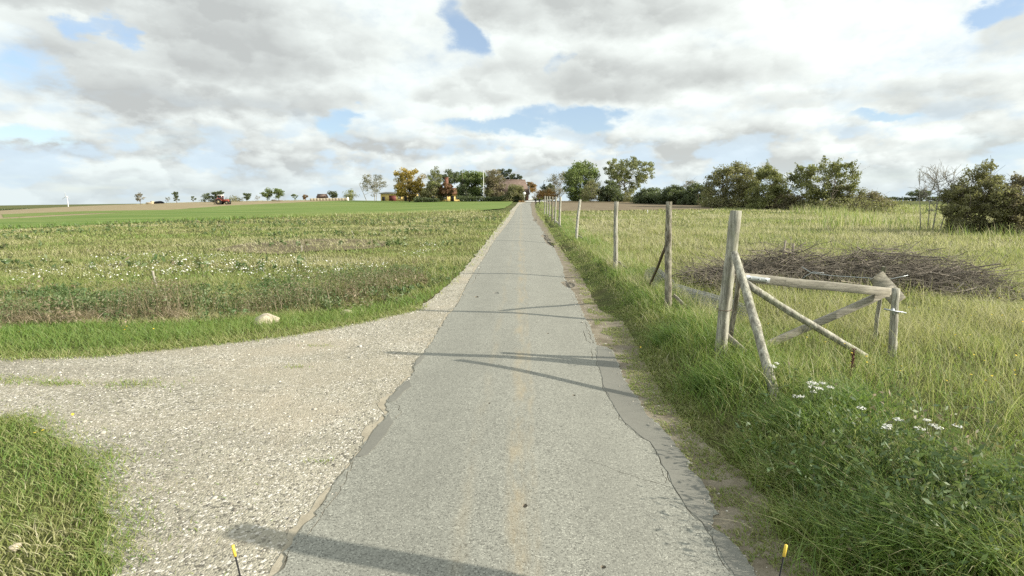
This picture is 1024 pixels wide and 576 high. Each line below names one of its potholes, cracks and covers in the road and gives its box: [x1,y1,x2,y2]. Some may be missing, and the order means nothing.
crack [582,323,730,572]
